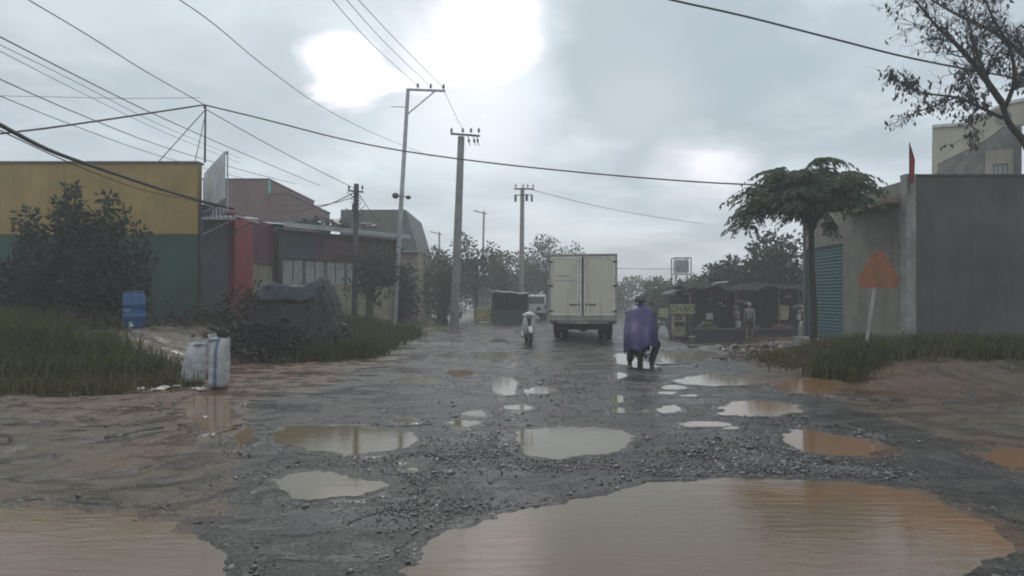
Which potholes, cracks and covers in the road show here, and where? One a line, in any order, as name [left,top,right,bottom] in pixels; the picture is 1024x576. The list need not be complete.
pothole [495,402,541,413]
pothole [707,399,818,419]
pothole [245,466,412,506]
pothole [379,473,1024,576]
pothole [962,442,1024,475]
pothole [165,394,249,437]
pothole [266,422,433,459]
pothole [449,409,495,419]
pothole [764,426,902,460]
pothole [484,376,525,397]
pothole [662,419,747,430]
pothole [665,373,772,388]
